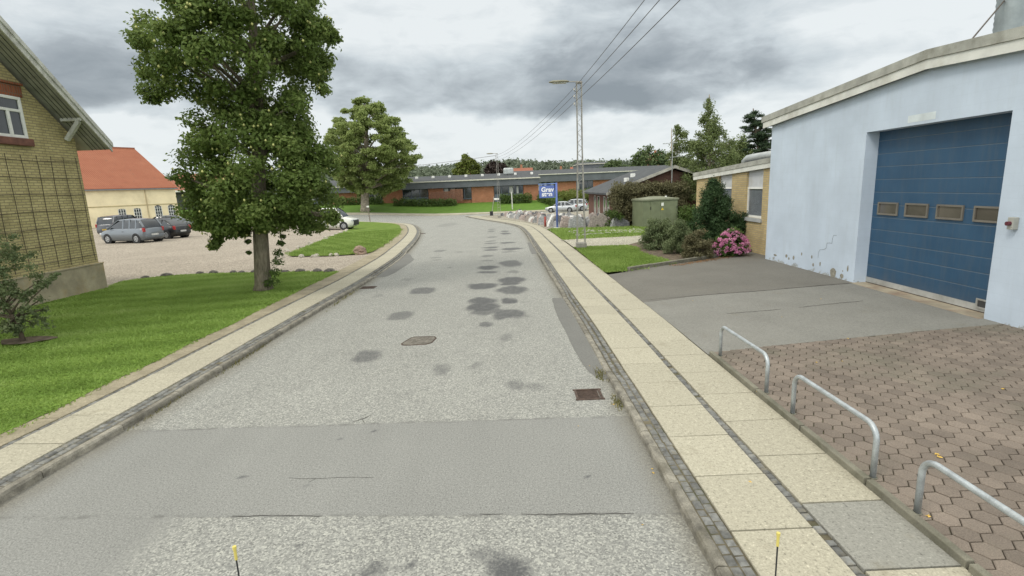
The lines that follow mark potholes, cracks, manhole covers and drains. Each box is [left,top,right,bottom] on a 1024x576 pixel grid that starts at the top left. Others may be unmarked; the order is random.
drain grate [573,388,605,401]
manhole cover [401,336,436,346]
